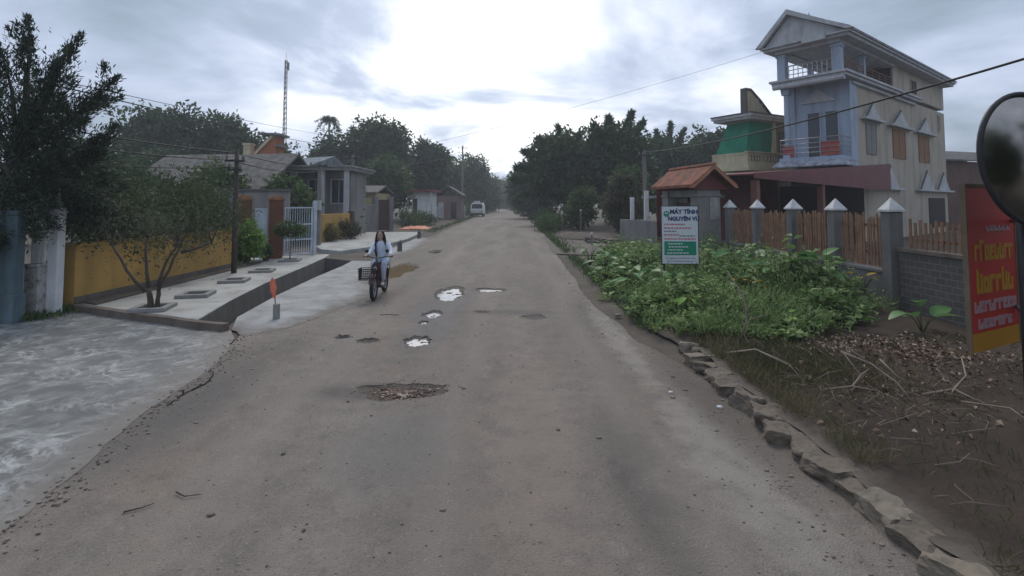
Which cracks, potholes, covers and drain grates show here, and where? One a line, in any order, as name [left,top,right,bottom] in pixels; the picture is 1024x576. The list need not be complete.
pothole [434,286,470,302]
pothole [400,335,434,348]
crack [166,372,214,406]
pothole [388,263,420,279]
pothole [333,374,465,405]
pothole [420,310,443,318]
